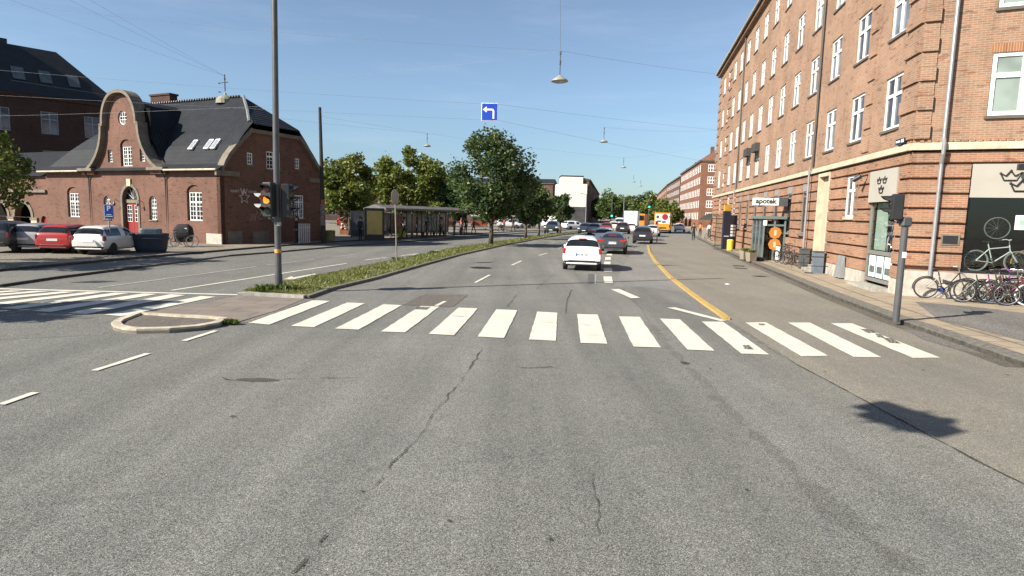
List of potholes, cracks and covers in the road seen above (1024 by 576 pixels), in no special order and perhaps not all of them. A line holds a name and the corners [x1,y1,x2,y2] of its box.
crack [291,350,482,574]
